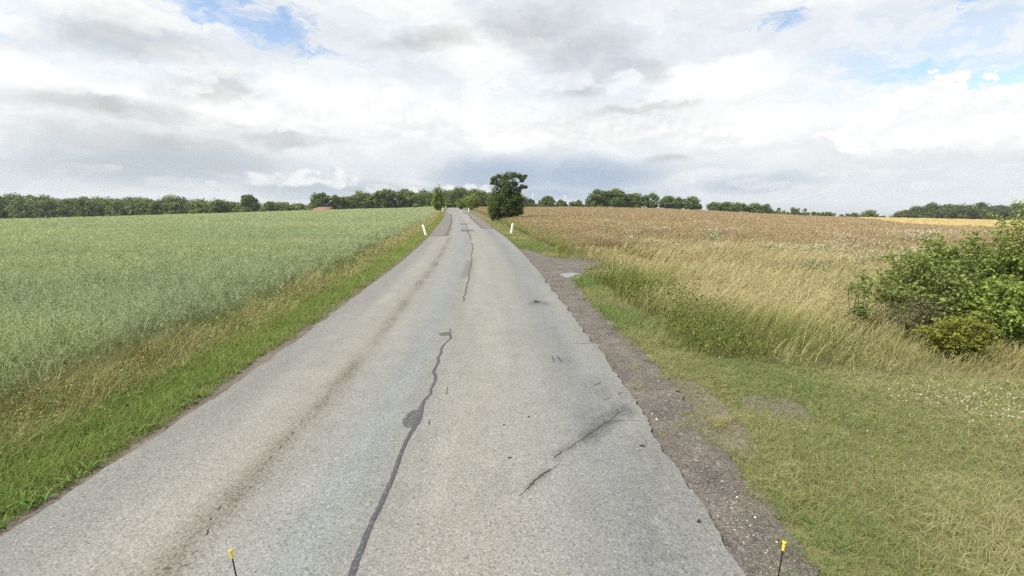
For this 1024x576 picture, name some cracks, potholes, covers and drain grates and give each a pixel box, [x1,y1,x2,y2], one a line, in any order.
crack [520,382,637,496]
